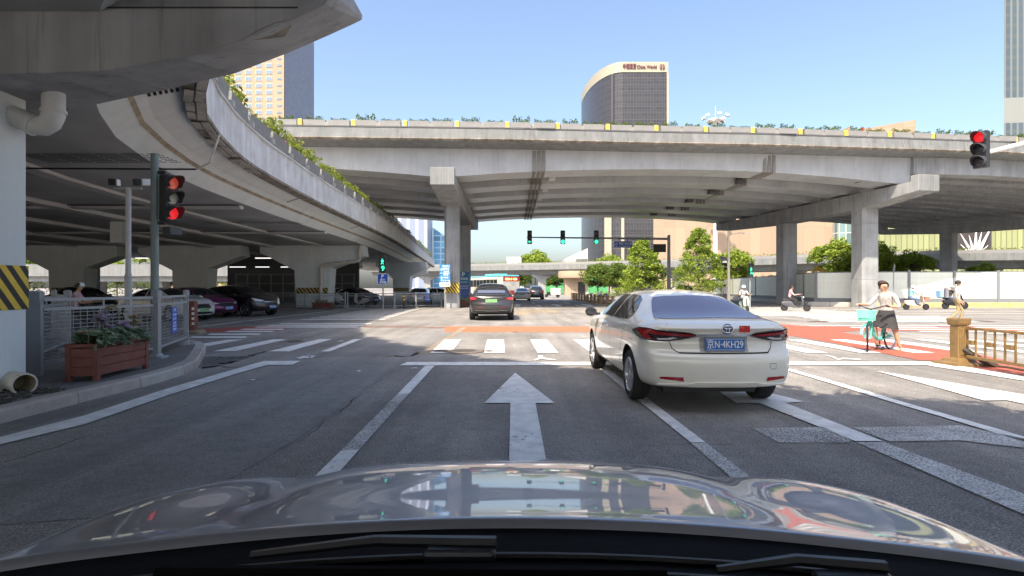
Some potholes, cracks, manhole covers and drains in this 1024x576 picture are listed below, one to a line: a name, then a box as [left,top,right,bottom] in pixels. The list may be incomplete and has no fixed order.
crack [273,353,419,458]
